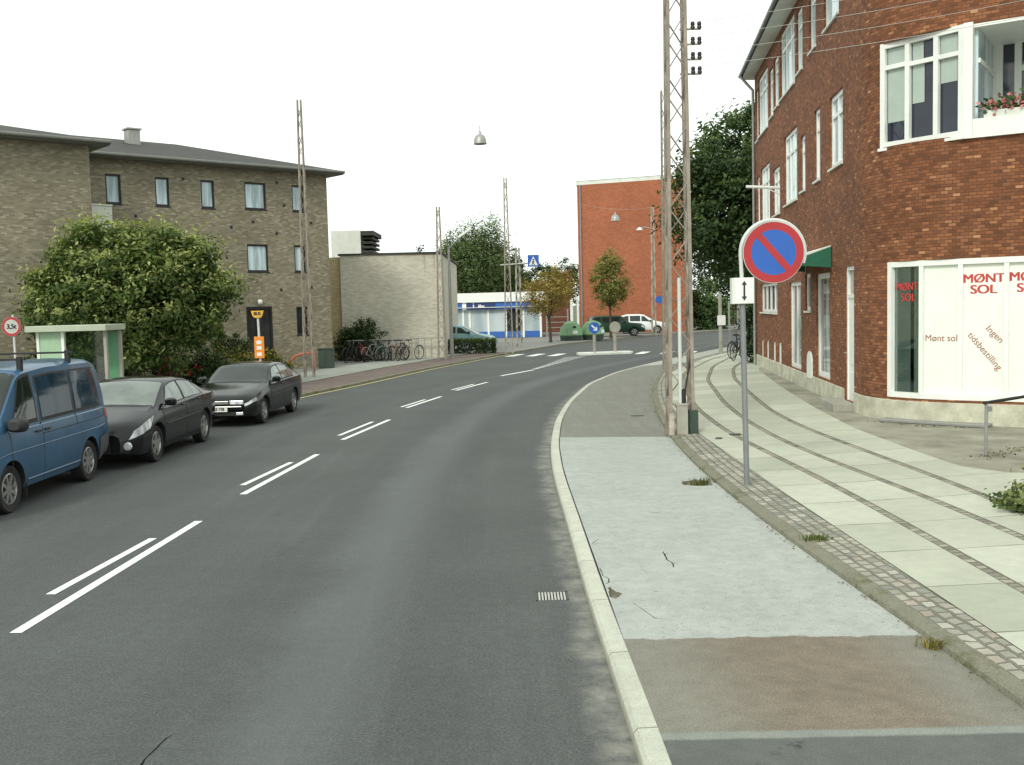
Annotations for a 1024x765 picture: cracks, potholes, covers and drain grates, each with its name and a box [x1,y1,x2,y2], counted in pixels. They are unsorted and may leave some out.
drain grate [535,591,569,601]
crack [140,734,174,765]
